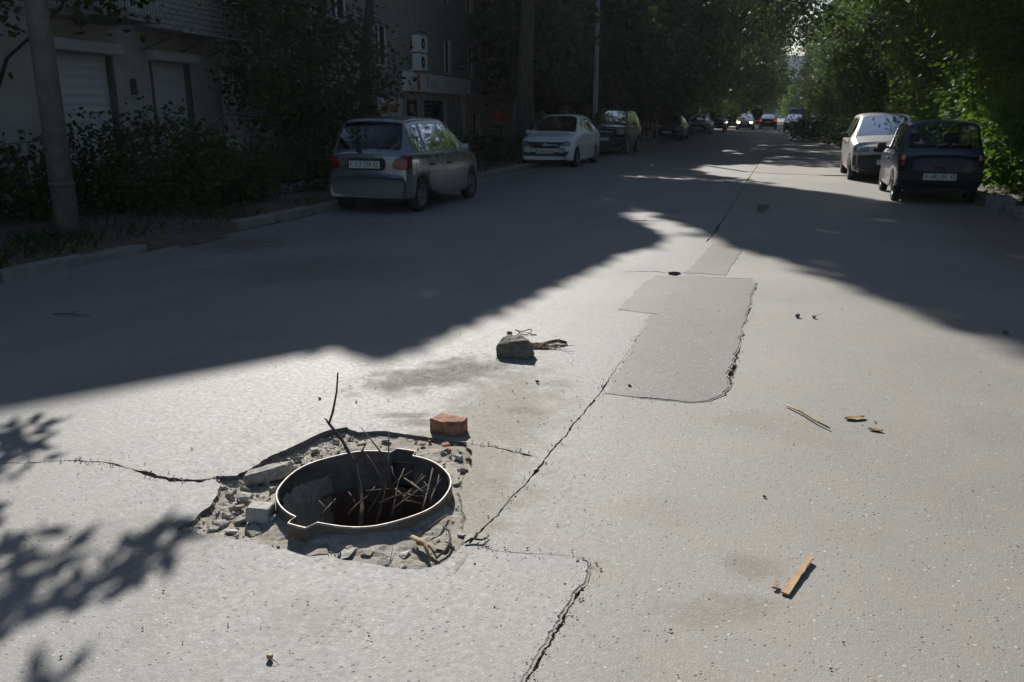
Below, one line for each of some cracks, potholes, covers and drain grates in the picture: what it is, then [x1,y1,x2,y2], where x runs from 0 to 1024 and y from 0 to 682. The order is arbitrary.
crack [471,444,531,456]
crack [0,460,215,483]
crack [481,547,591,682]
manhole cover [275,448,452,543]
pothole [178,427,473,570]
